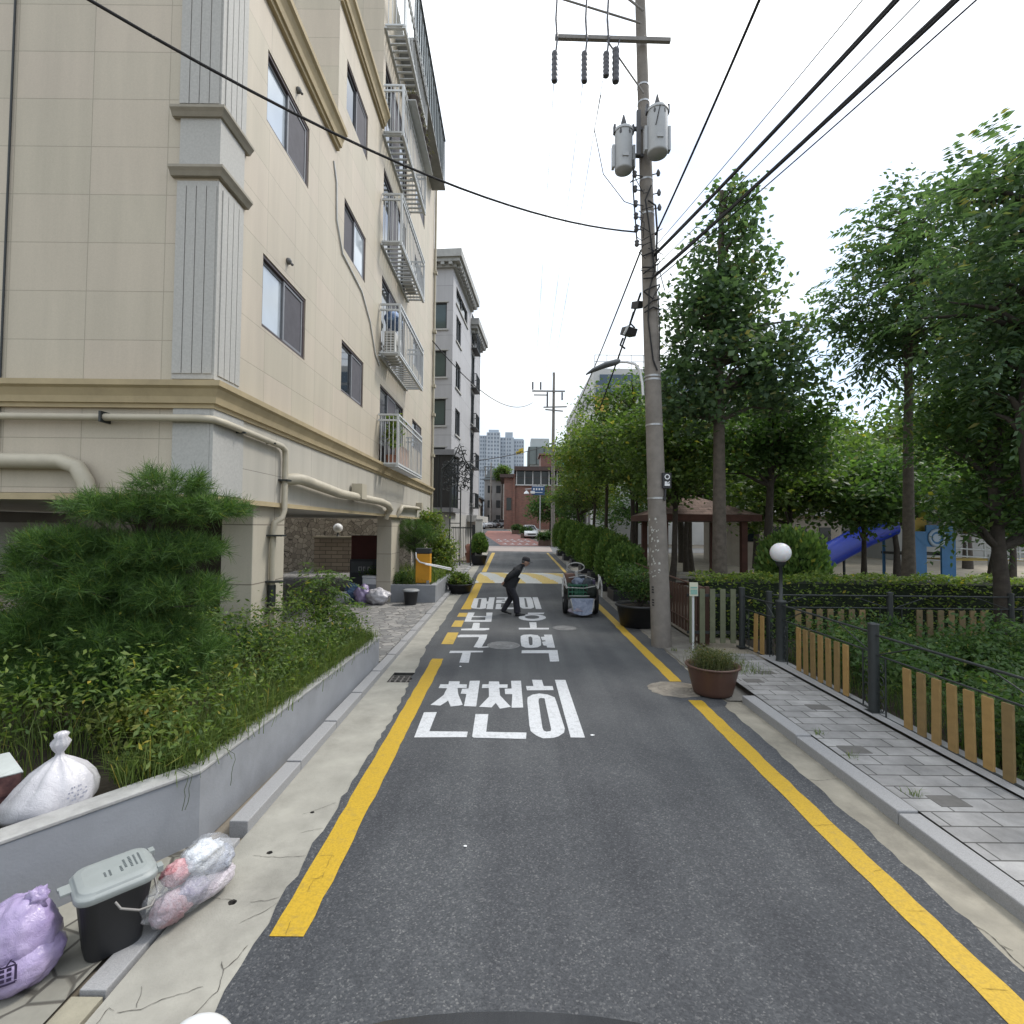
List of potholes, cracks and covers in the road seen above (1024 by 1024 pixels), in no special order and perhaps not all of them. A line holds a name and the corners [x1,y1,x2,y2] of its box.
drain grate [387,673,415,682]
crack [96,946,247,1024]
manhole cover [487,641,520,649]
